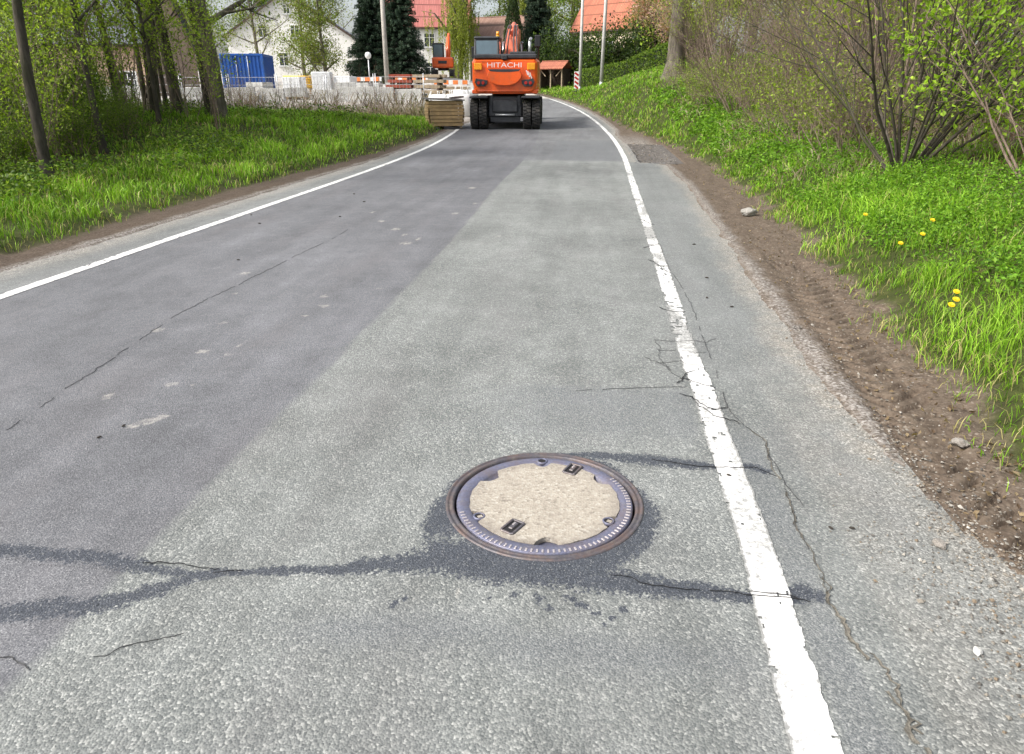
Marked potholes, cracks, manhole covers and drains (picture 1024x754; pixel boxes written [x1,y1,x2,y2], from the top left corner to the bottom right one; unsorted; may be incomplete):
manhole cover [445,452,644,562]
